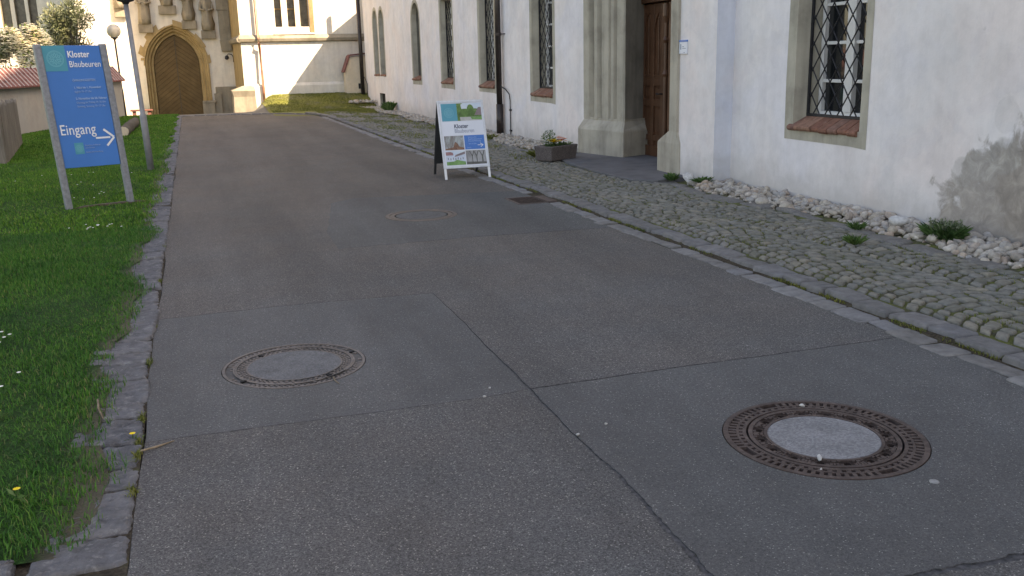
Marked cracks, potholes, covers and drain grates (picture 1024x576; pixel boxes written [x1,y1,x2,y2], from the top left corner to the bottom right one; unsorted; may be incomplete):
manhole cover [723,401,931,480]
manhole cover [385,209,457,221]
drain grate [504,195,557,205]
manhole cover [222,343,365,389]
